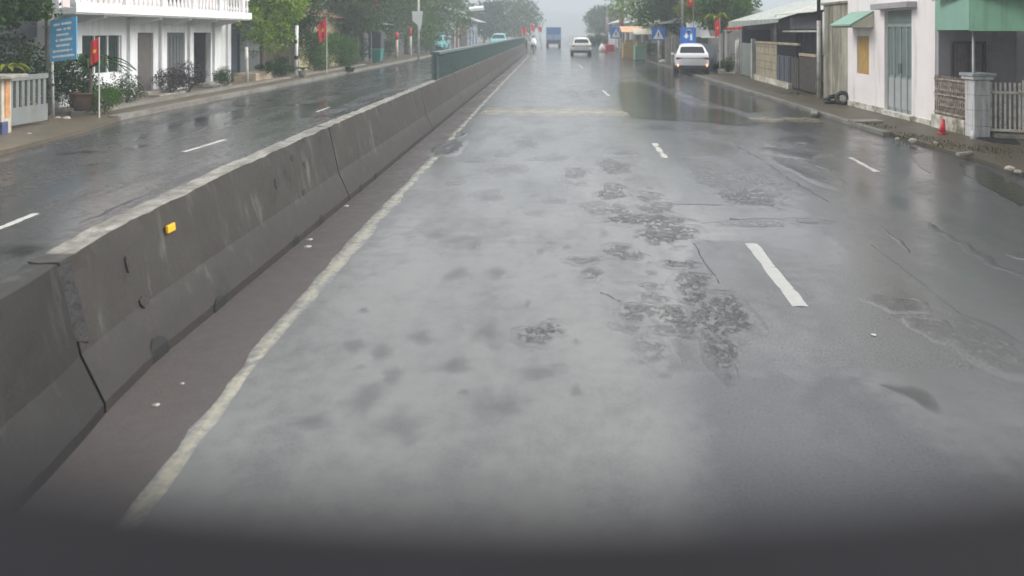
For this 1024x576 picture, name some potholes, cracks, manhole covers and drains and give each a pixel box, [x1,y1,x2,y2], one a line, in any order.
pothole [588,213,701,227]
pothole [579,267,607,283]
pothole [606,322,645,335]
pothole [656,259,705,271]
pothole [593,241,654,265]
pothole [602,203,633,214]
crack [880,226,910,252]
pothole [634,291,676,305]
crack [731,137,829,201]
pothole [878,384,945,418]
pothole [672,337,702,362]
pothole [637,282,670,290]
